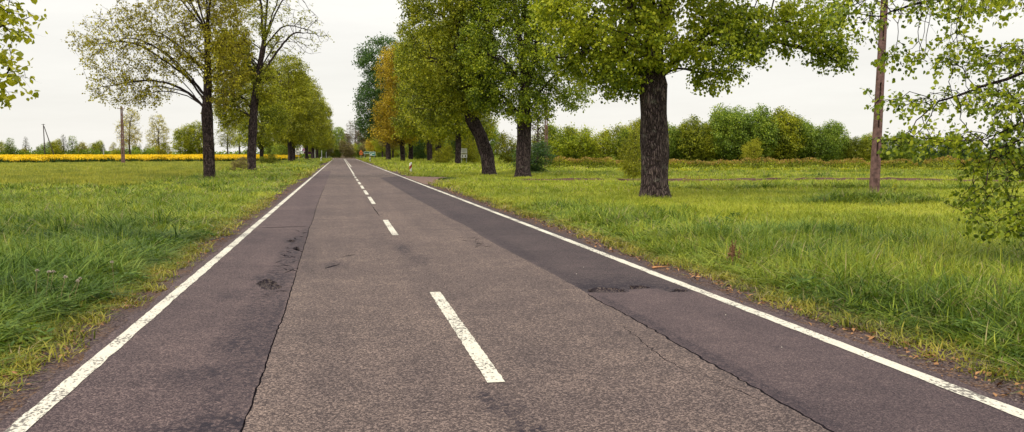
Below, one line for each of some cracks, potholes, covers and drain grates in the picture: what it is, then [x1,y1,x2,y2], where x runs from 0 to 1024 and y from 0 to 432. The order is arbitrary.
pothole [257,279,282,290]
crack [588,294,834,432]
